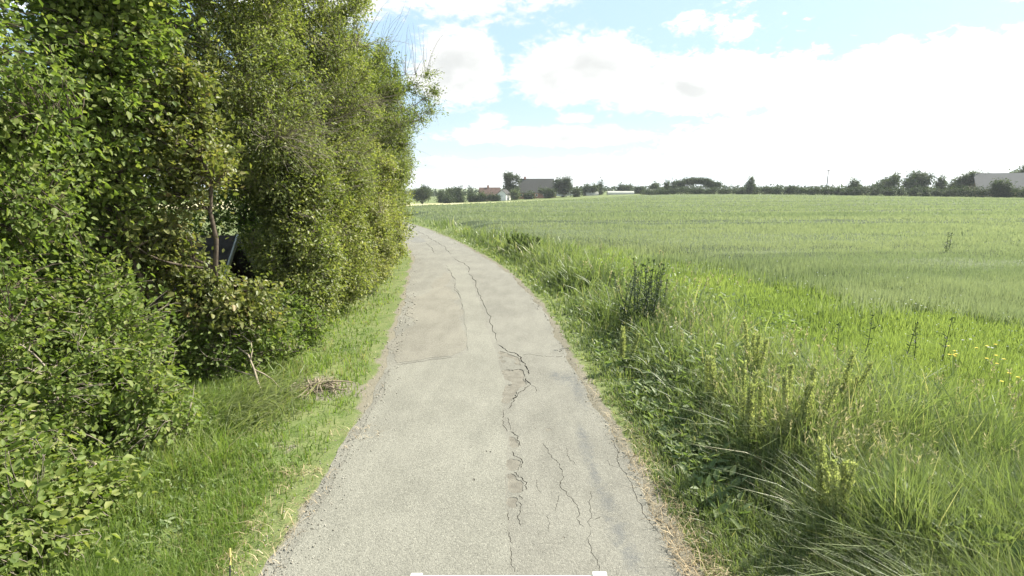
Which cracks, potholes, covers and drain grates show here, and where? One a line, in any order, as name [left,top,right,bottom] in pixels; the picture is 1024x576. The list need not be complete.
crack [418,231,562,571]
crack [607,441,662,527]
crack [543,444,600,571]
